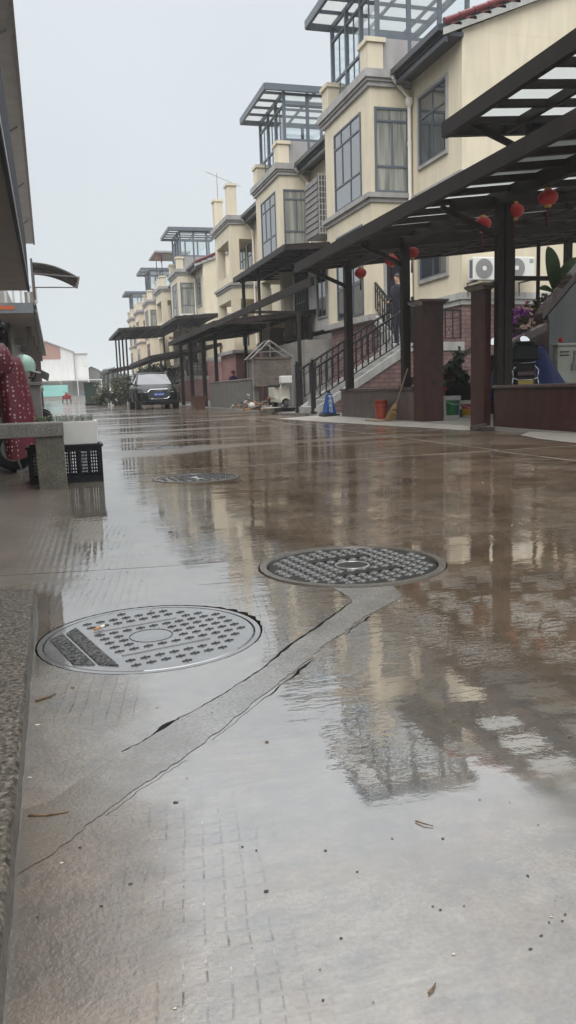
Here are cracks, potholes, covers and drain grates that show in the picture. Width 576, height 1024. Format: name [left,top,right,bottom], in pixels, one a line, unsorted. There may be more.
manhole cover [153,473,240,483]
manhole cover [35,605,263,675]
crack [121,593,372,752]
manhole cover [258,545,448,588]
